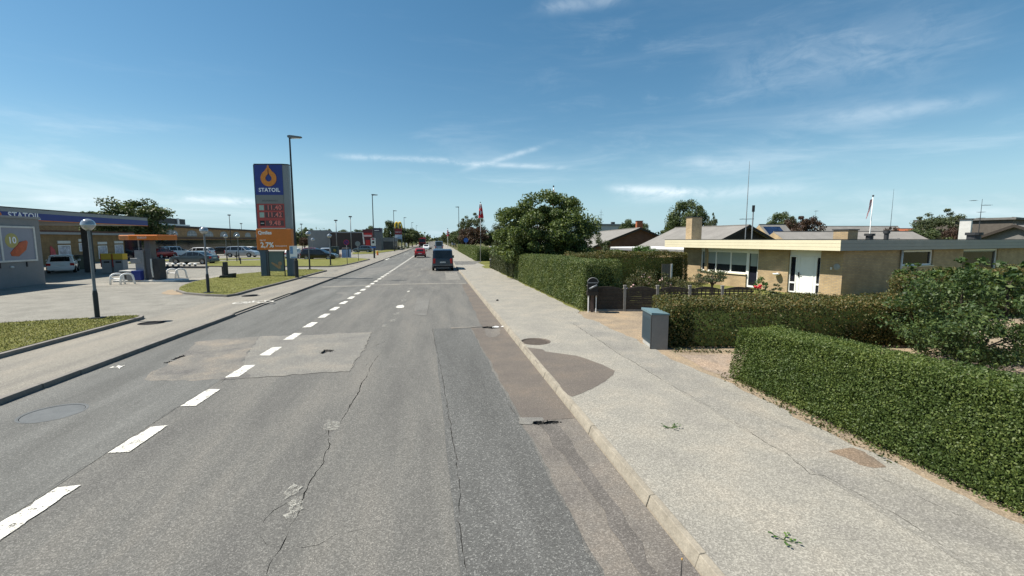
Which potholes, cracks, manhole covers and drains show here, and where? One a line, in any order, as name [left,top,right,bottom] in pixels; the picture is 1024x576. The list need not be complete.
crack [262,337,385,574]
manhole cover [14,403,89,423]
